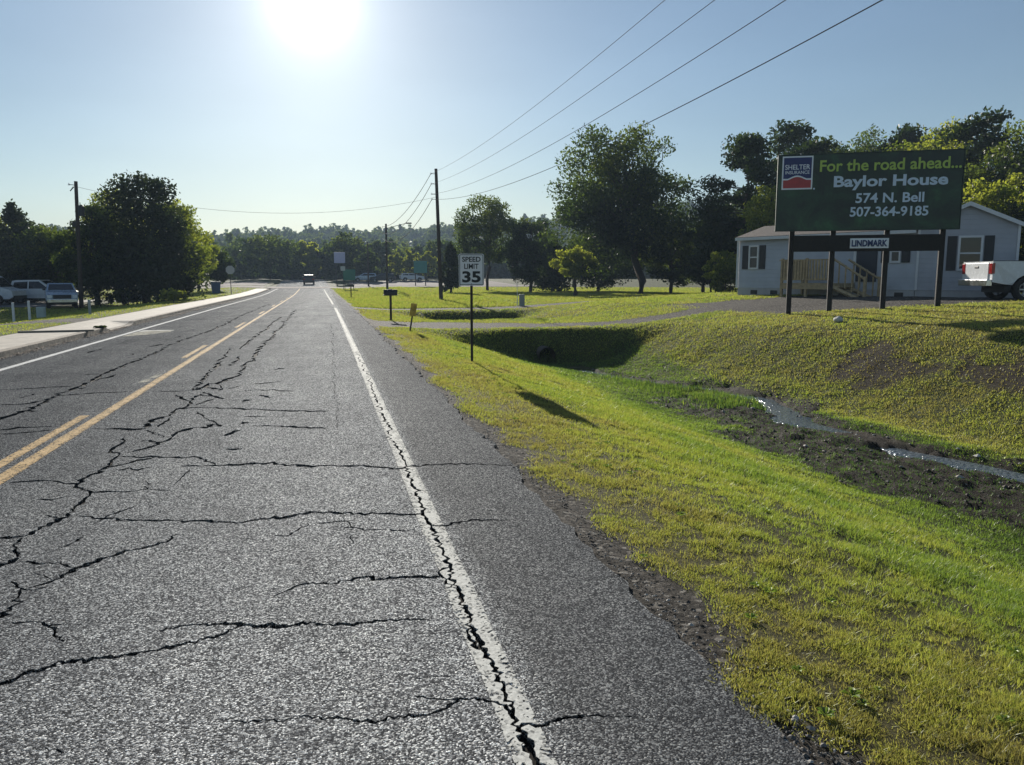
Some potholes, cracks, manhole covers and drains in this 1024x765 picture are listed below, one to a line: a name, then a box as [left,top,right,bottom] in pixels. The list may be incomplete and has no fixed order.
crack [0,310,635,765]
